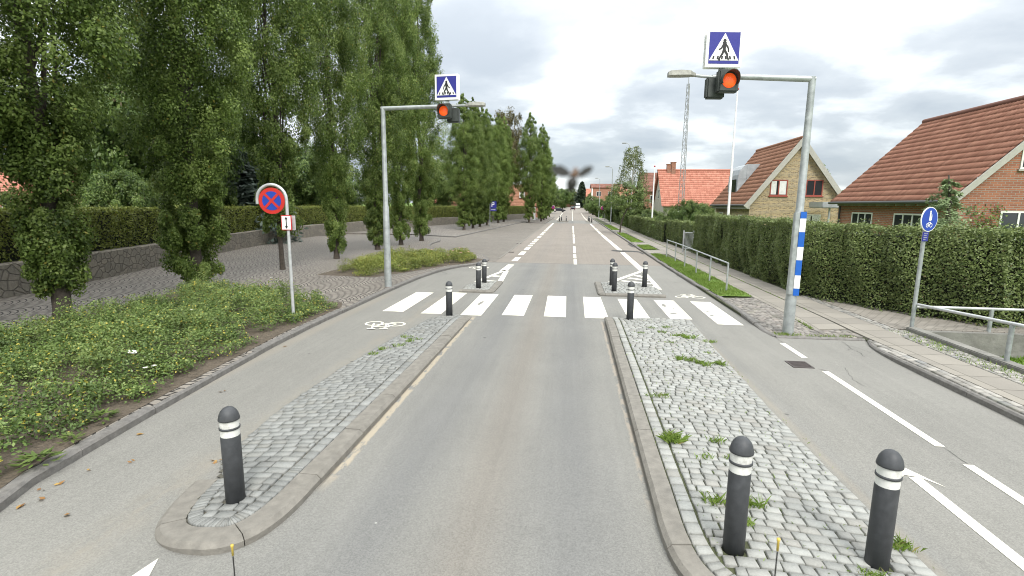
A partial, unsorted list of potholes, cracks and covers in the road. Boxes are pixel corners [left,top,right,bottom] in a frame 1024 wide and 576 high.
drain grate [785,361,815,369]
